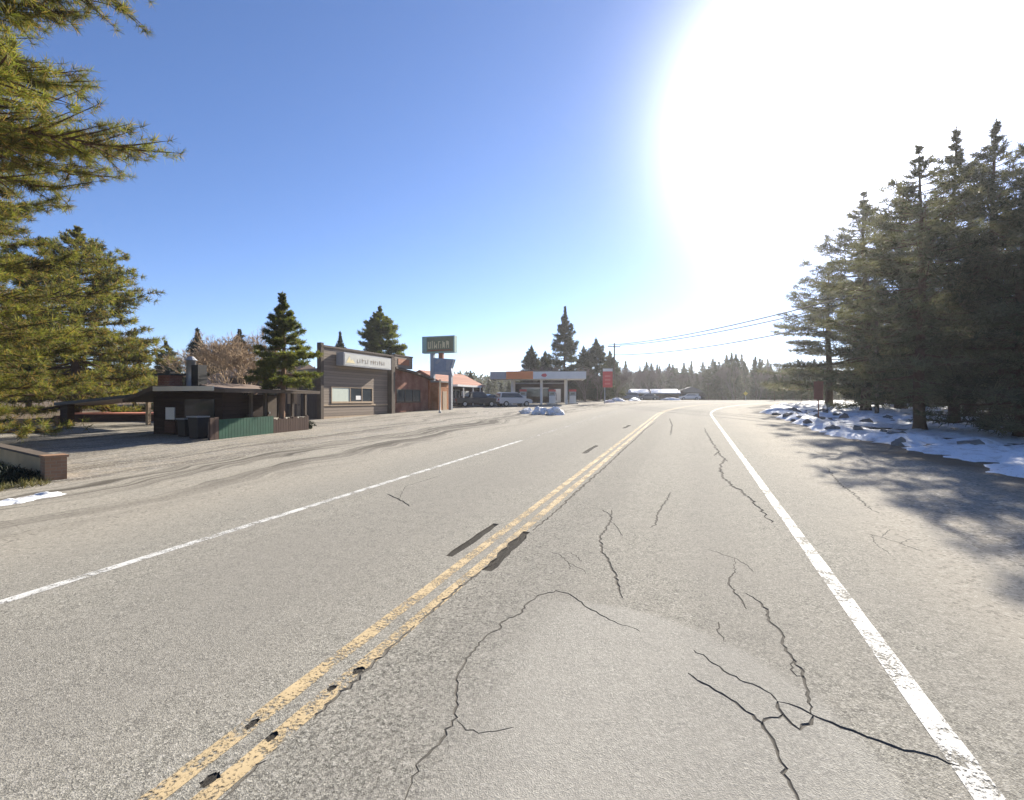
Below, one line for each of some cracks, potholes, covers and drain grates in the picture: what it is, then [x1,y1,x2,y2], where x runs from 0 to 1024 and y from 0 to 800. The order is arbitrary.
crack [688,550,960,800]
pothole [199,771,220,788]
crack [705,429,774,523]
crack [826,467,917,555]
crack [222,424,670,800]
